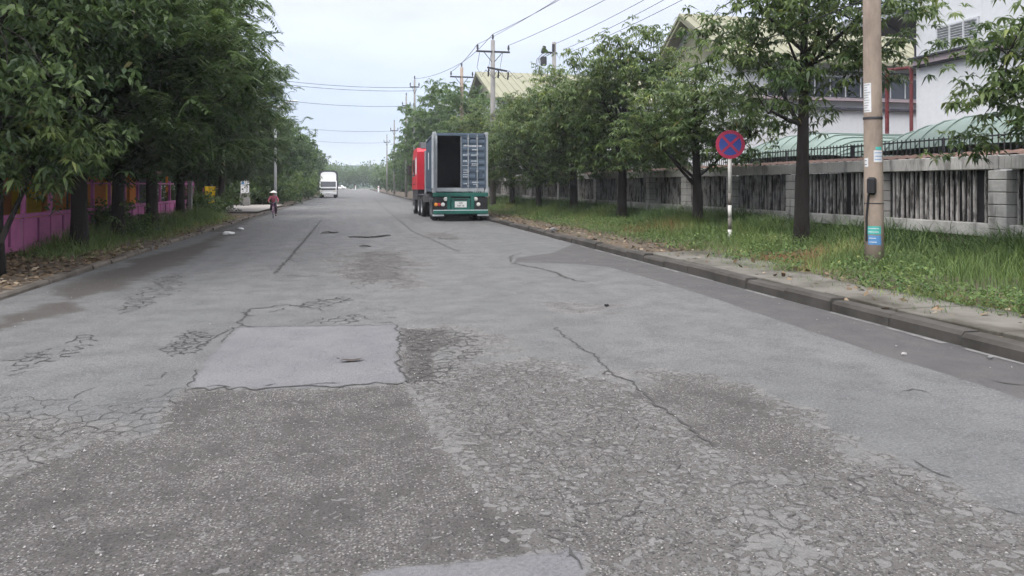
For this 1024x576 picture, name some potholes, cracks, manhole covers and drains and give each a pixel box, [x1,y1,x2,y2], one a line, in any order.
crack [1,249,706,569]
crack [702,459,990,576]
